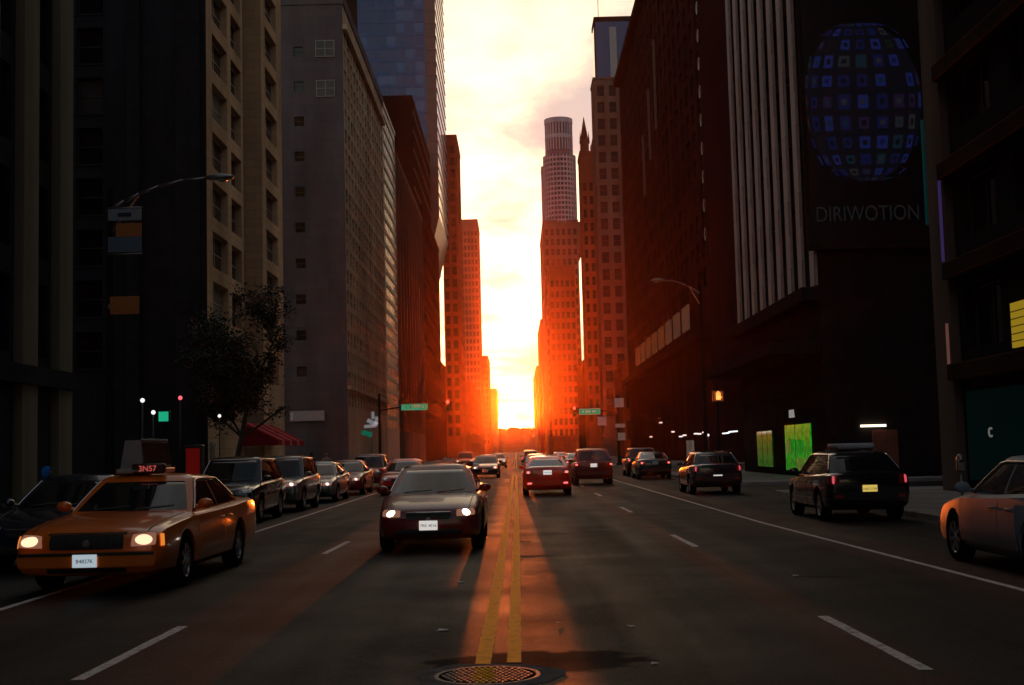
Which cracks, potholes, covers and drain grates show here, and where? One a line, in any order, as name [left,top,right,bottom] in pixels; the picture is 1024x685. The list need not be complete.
manhole cover [415,664,567,685]
